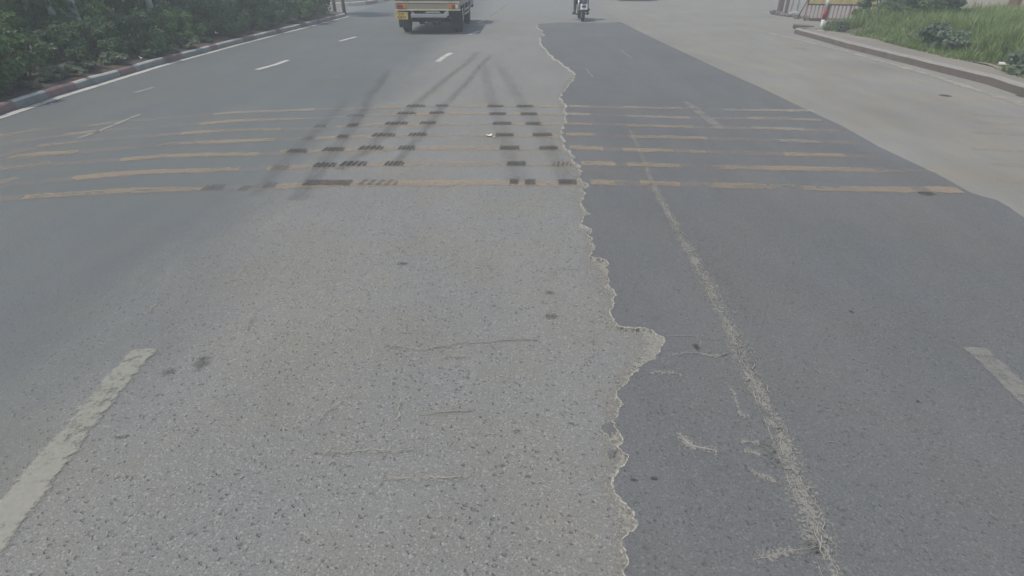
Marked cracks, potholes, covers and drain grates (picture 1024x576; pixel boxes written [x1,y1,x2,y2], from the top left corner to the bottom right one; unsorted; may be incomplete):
crack [310,445,424,456]
crack [393,401,474,421]
crack [628,130,866,576]
crack [382,472,470,483]
crack [386,336,538,359]
crack [315,400,343,423]
